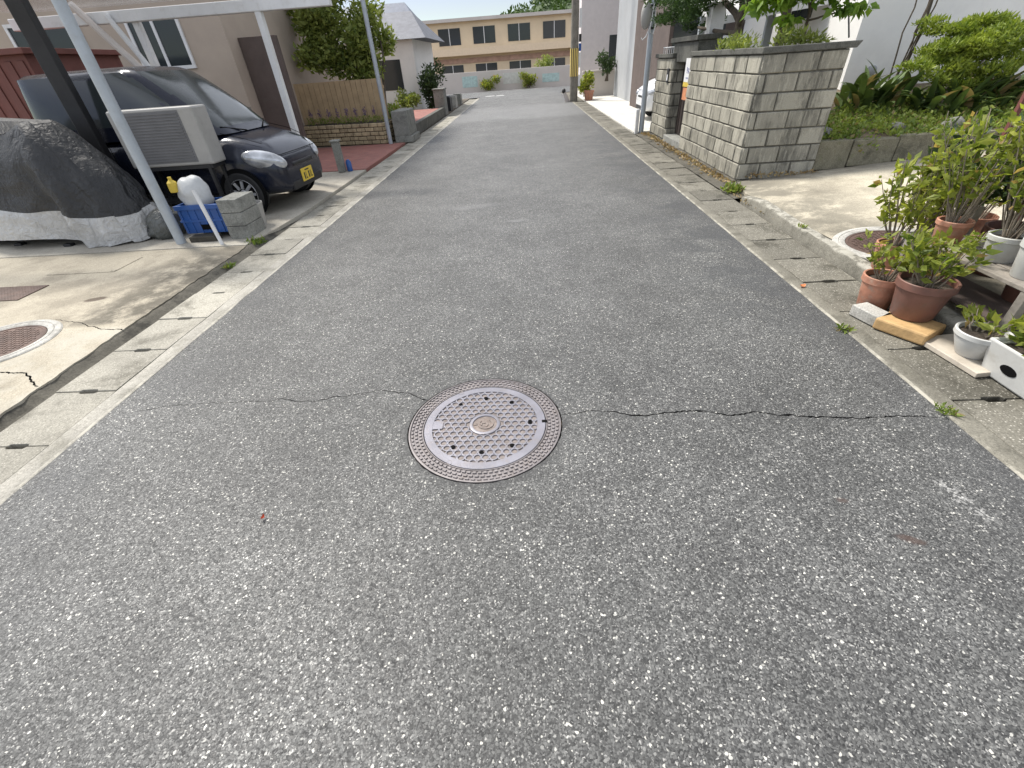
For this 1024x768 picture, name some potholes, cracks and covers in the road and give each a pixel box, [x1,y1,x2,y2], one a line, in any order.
crack [135,390,427,412]
manhole cover [0,319,63,362]
crack [0,372,38,387]
crack [563,410,936,419]
manhole cover [832,226,916,263]
manhole cover [409,379,561,484]
